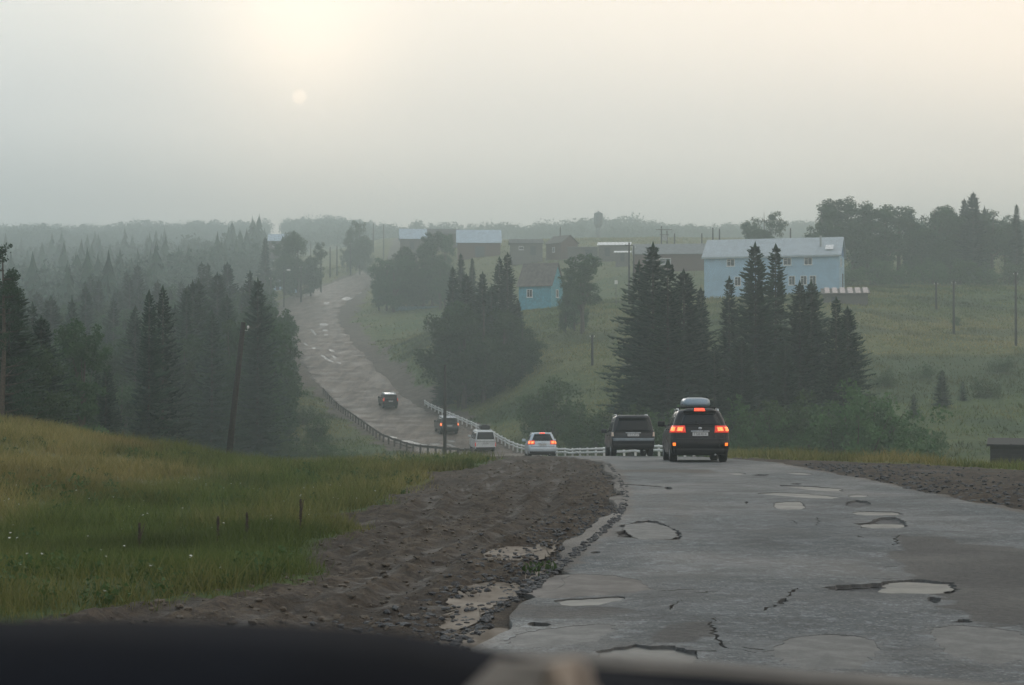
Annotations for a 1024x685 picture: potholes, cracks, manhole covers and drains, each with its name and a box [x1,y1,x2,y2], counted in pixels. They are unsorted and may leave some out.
pothole [617,520,682,540]
crack [663,589,717,610]
pothole [596,644,699,661]
pothole [554,596,625,606]
pothole [773,501,805,510]
crack [695,618,764,655]
pothole [822,579,960,594]
pothole [845,500,871,508]
pothole [855,517,908,528]
